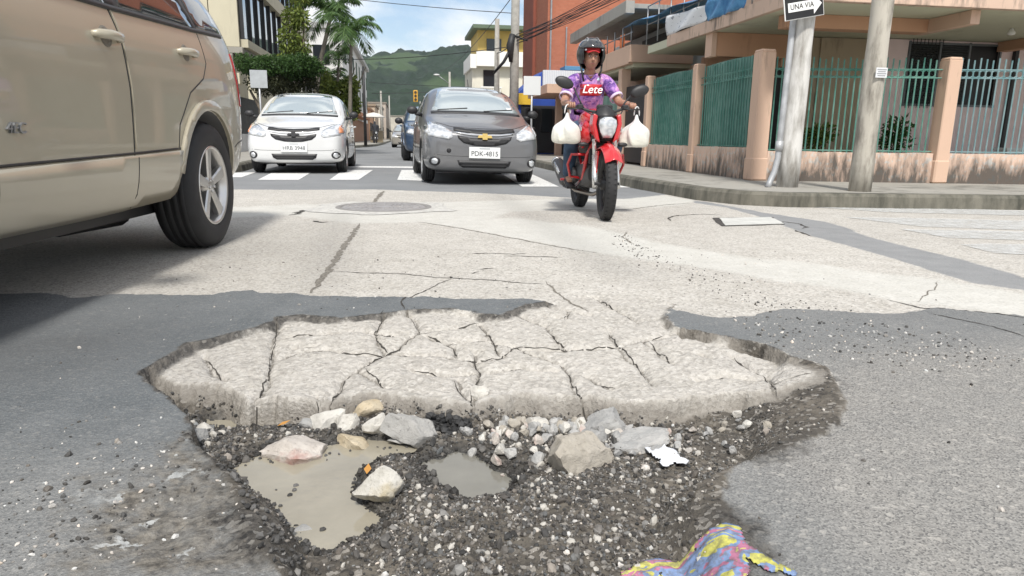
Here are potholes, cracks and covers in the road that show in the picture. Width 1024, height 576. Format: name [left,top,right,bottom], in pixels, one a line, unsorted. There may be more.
crack [337,232,633,311]
crack [633,203,810,236]
pothole [139,295,847,576]
manhole cover [713,217,784,226]
manhole cover [305,201,456,215]
crack [206,302,807,434]
